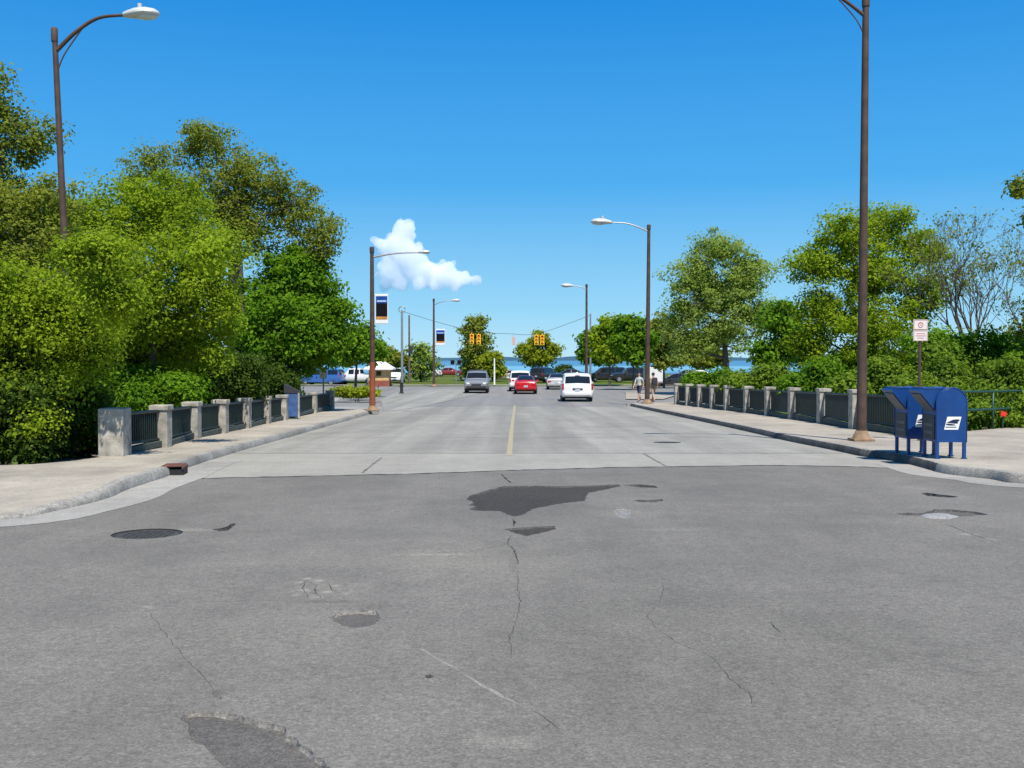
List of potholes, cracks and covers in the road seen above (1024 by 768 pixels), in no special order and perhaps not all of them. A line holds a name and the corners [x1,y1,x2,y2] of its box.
pothole [180,710,330,768]
crack [646,586,752,703]
pothole [329,610,381,628]
crack [413,520,577,746]
drain grate [161,463,188,475]
crack [145,608,222,704]
manhole cover [111,529,183,539]
